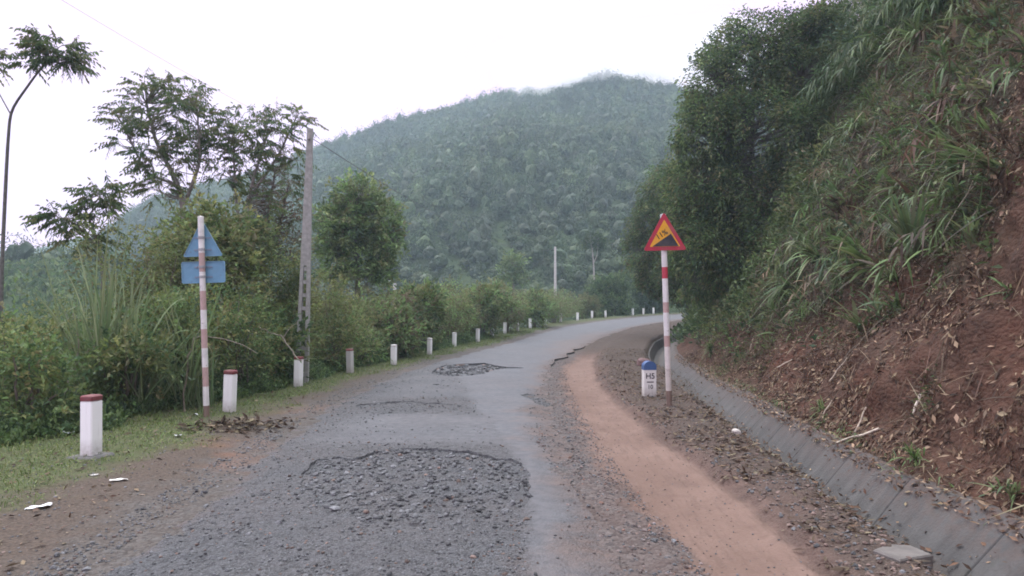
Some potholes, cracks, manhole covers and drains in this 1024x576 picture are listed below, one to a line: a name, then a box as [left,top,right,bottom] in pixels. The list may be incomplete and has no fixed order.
pothole [431,363,521,376]
pothole [355,400,453,414]
pothole [521,394,553,407]
pothole [300,448,533,527]
